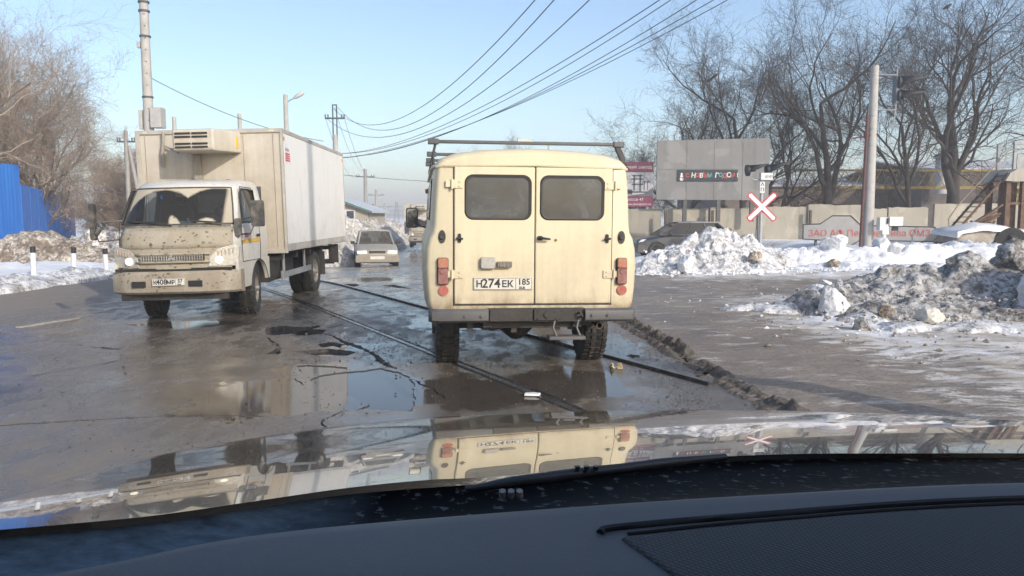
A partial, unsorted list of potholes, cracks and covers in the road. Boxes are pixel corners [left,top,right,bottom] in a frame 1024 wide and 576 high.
crack [305,315,397,369]
crack [321,410,348,428]
pothole [265,325,320,335]
